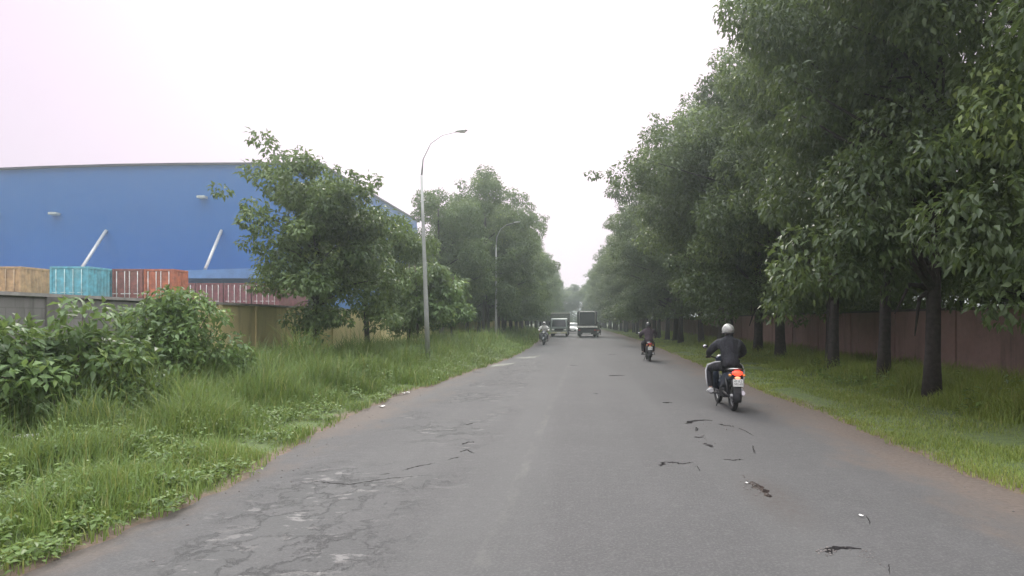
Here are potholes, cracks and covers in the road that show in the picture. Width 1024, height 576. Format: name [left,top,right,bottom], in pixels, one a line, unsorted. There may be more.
crack [316,442,474,485]
crack [660,420,755,471]
